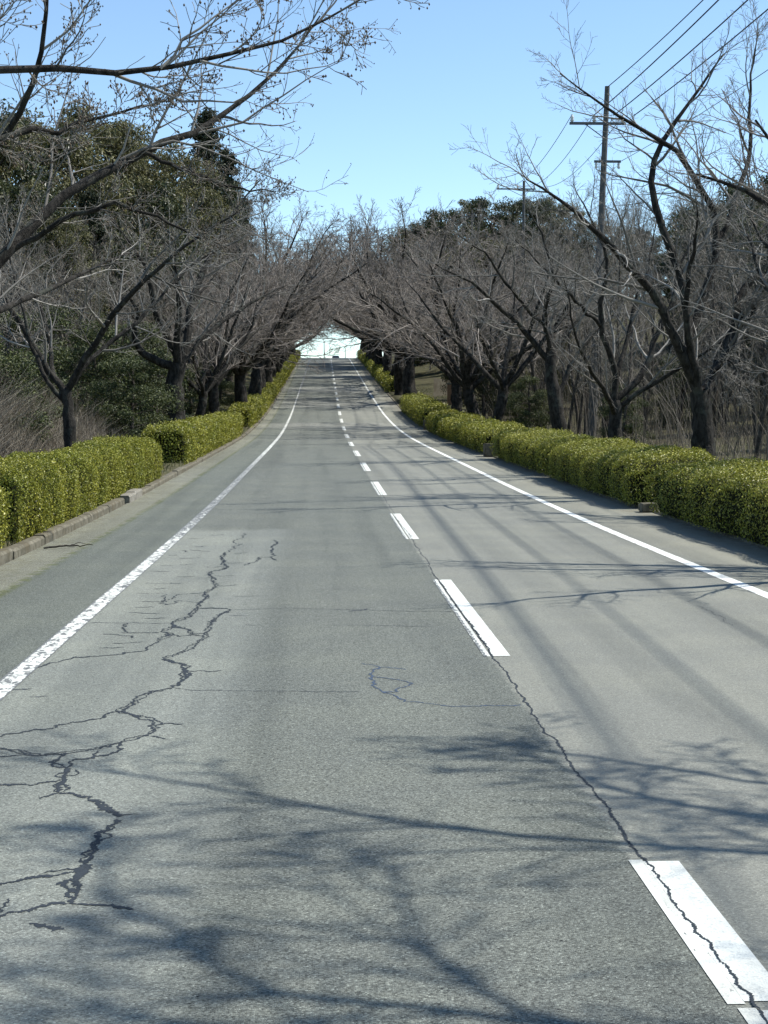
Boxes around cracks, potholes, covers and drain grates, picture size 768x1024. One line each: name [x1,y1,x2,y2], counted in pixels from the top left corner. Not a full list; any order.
crack [0,533,517,931]
